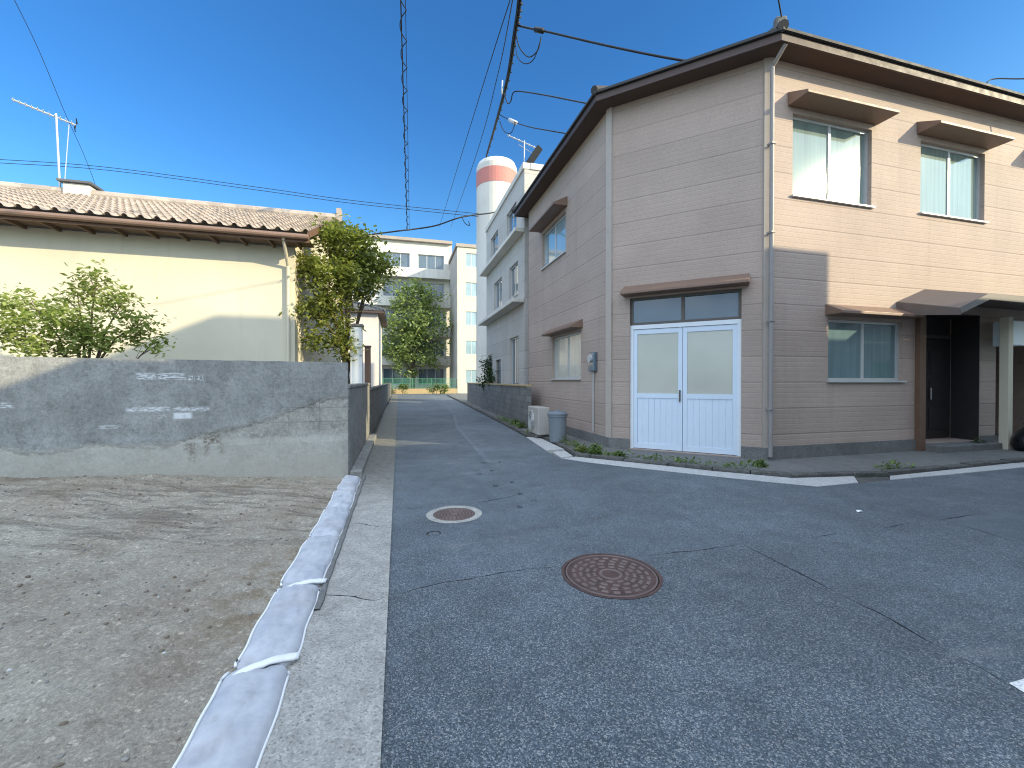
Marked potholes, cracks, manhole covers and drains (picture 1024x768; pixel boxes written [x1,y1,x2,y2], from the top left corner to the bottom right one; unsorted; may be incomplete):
manhole cover [426,506,482,523]
manhole cover [561,553,663,600]
crack [401,566,557,594]
